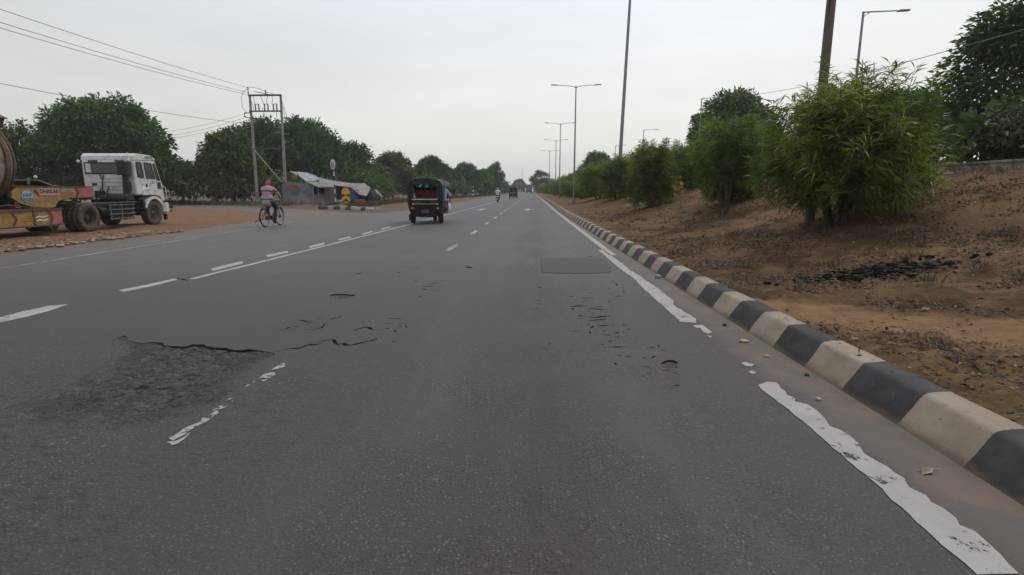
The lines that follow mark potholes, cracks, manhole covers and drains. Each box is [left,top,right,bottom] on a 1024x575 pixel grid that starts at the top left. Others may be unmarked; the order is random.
crack [278,316,408,352]
crack [569,278,679,386]
pothole [661,360,677,369]
